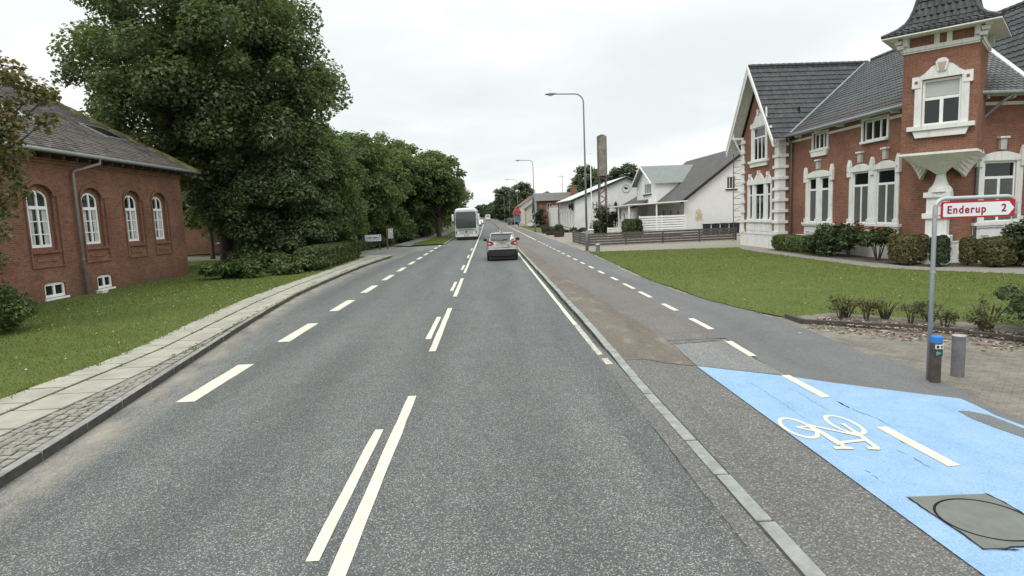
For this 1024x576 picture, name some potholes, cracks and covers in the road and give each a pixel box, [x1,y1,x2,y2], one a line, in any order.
manhole cover [909,493,1024,548]
